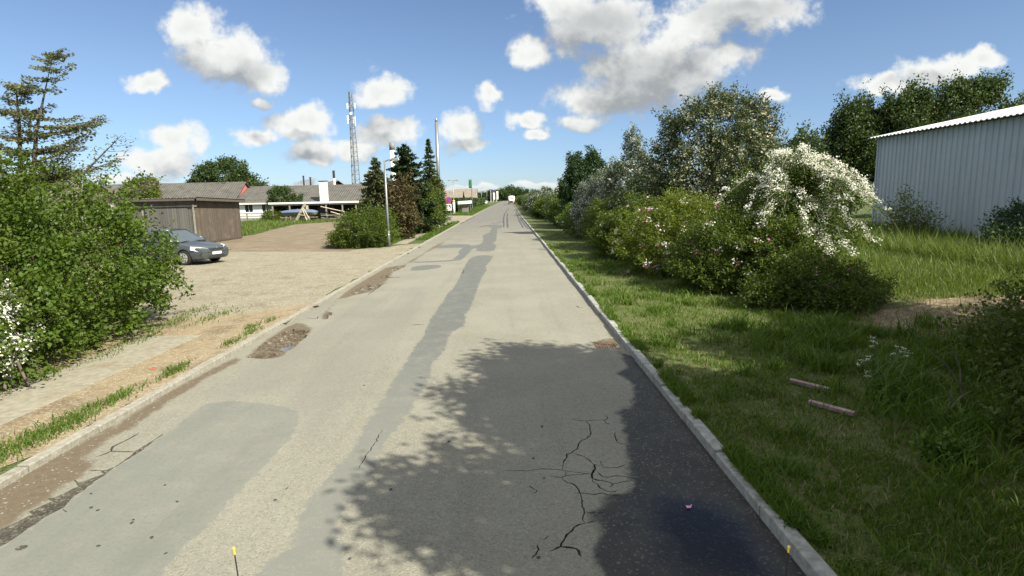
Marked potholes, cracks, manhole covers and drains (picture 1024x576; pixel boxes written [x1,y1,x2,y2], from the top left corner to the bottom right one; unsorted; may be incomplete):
crack [504,416,630,558]
crack [0,434,163,547]
pothole [348,284,380,295]
pothole [257,329,309,352]
